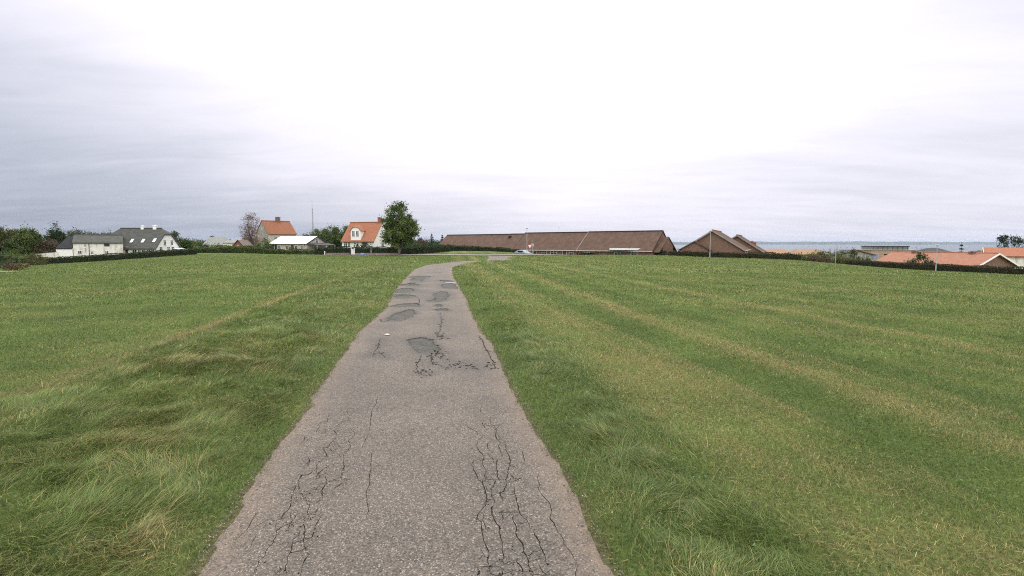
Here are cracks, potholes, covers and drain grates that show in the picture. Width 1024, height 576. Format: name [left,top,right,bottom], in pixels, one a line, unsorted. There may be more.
crack [415,313,499,376]
crack [459,408,578,576]
crack [236,408,355,576]
crack [362,399,377,518]
